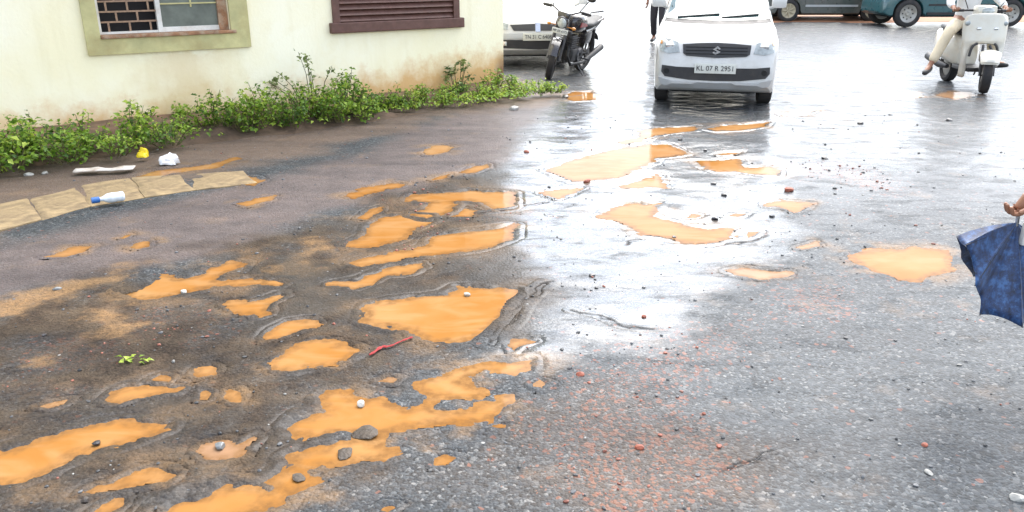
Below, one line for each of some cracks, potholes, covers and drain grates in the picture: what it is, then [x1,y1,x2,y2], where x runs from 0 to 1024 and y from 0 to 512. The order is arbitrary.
pothole [320,260,433,291]
pothole [588,199,748,247]
pothole [837,244,968,285]
pothole [396,188,524,223]
crack [471,277,662,350]
pothole [718,264,798,282]
pothole [757,199,818,214]
pothole [105,257,296,303]
crack [706,445,781,476]
pothole [135,353,543,512]
pothole [0,413,187,492]
pothole [334,211,443,252]
